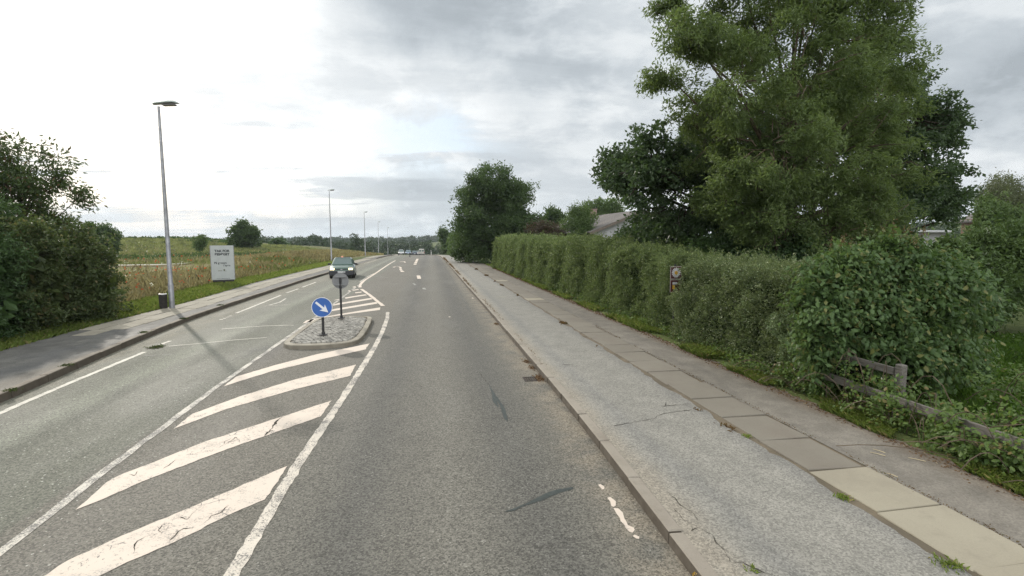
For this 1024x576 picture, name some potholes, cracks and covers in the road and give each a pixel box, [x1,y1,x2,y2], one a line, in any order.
crack [674,497,769,574]
crack [133,507,226,551]
